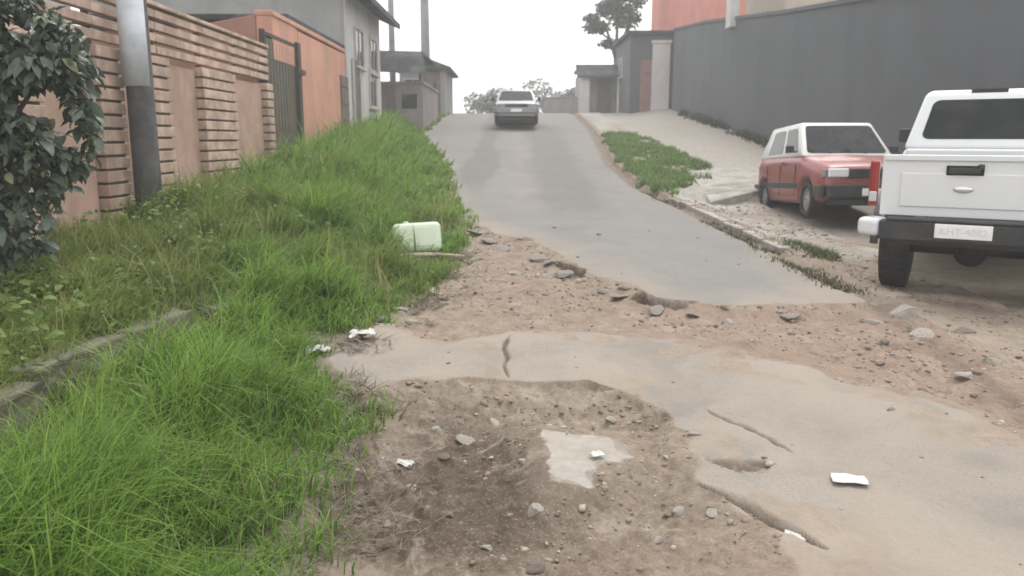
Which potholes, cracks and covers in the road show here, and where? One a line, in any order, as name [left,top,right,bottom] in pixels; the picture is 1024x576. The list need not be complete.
crack [501,337,510,378]
crack [698,484,825,549]
pothole [290,377,800,576]
pothole [367,221,1024,440]
crack [708,410,792,453]
